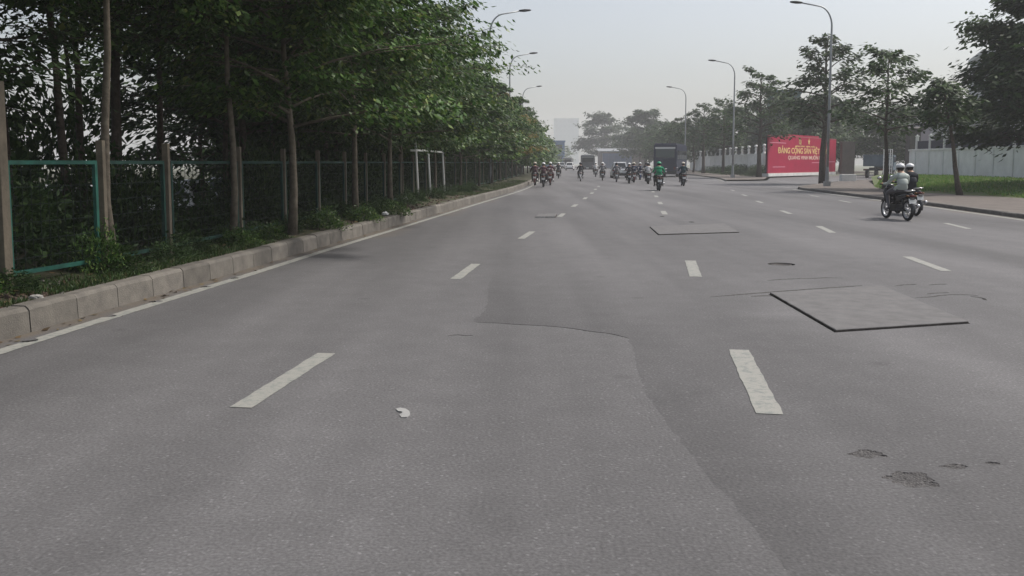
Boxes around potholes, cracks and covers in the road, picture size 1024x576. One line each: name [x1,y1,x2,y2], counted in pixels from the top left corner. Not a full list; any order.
crack [896,284,986,300]
crack [715,277,862,297]
pothole [881,471,940,488]
pothole [847,449,888,459]
